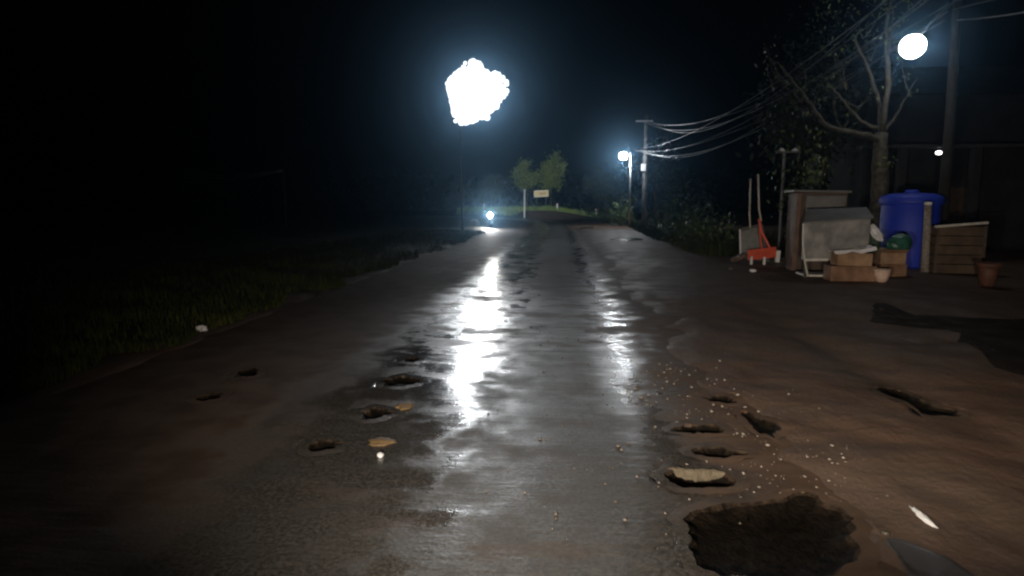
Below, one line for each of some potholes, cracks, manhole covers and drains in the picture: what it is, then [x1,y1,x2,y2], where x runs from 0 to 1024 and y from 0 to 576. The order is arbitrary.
pothole [295,435,357,457]
pothole [659,420,736,438]
pothole [227,366,266,380]
pothole [650,464,751,495]
pothole [692,392,748,407]
pothole [396,355,427,365]
pothole [373,373,432,389]
pothole [678,443,761,464]
pothole [349,404,405,424]
pothole [868,384,972,420]
pothole [666,486,881,576]
pothole [734,406,793,443]
